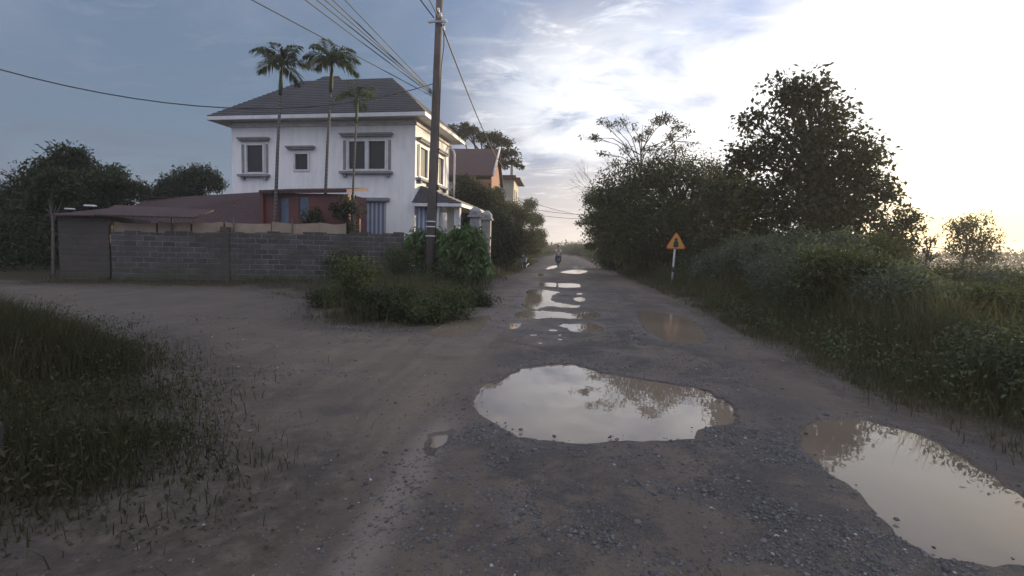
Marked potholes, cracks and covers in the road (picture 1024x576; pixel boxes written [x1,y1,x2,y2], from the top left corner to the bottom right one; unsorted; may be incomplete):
pothole [520,289,581,310]
pothole [471,363,741,444]
pothole [634,310,708,344]
pothole [798,414,1024,567]
pothole [512,310,602,319]
pothole [559,322,606,333]
pothole [424,428,456,456]
